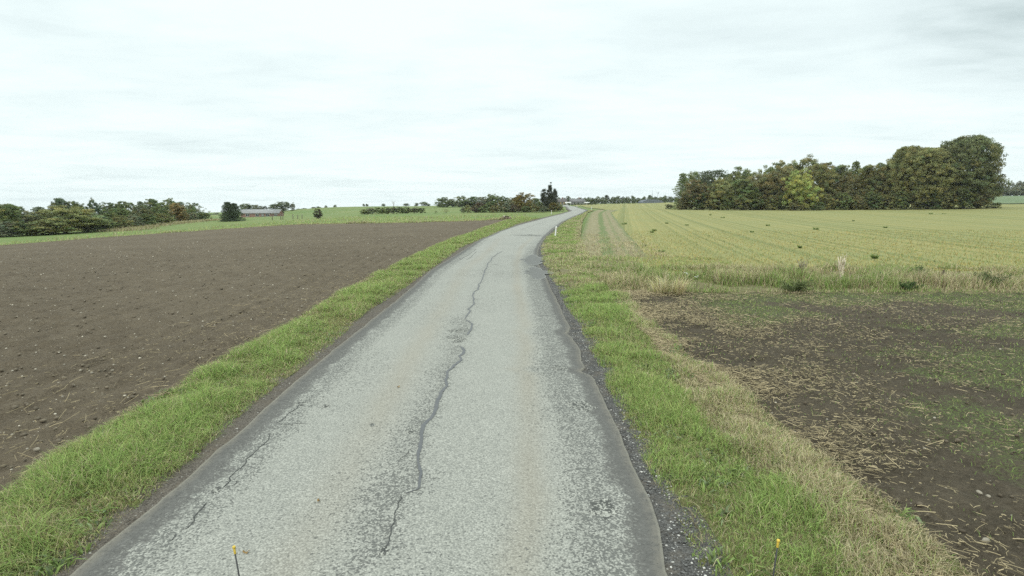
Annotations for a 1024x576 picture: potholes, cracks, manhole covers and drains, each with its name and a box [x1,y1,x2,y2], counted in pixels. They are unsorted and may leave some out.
crack [170,399,310,541]
crack [383,494,402,554]
